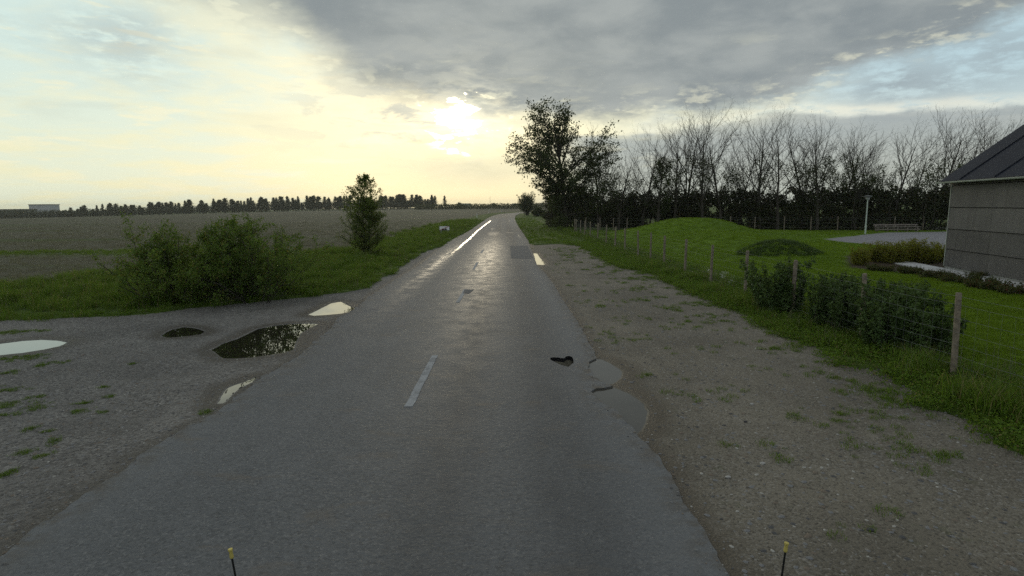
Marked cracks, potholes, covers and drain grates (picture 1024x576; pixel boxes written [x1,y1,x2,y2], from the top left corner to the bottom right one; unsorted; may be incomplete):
pothole [589,358,623,385]
pothole [592,387,649,434]
pothole [215,376,257,404]
pothole [307,301,355,316]
pothole [550,356,574,367]
